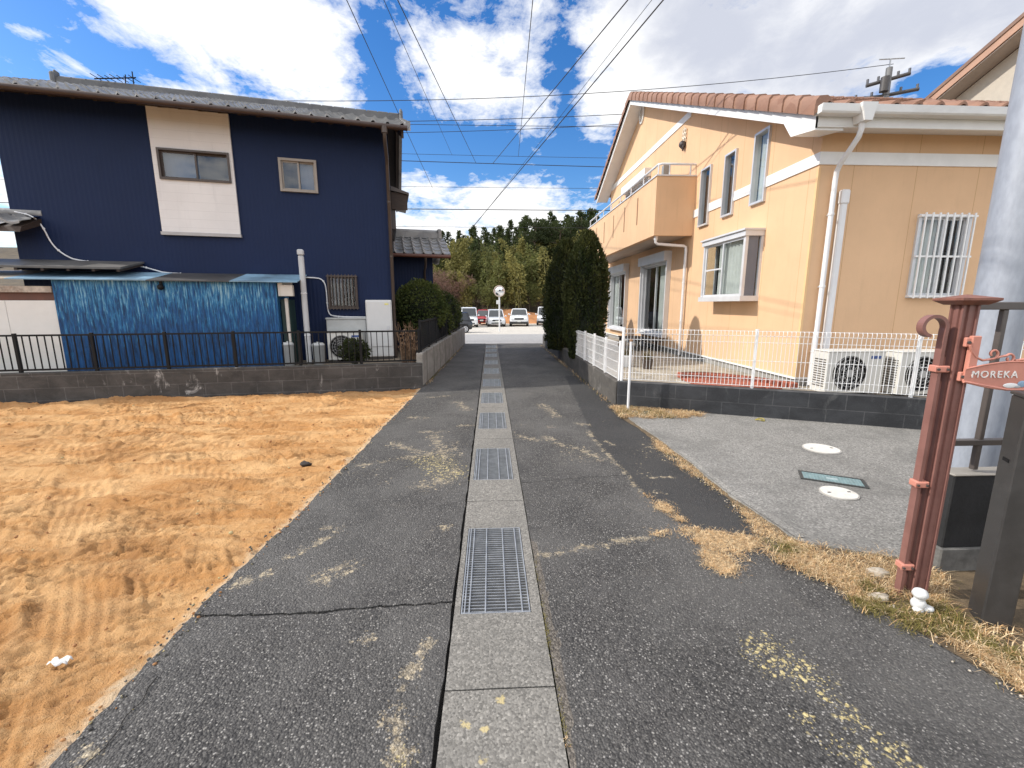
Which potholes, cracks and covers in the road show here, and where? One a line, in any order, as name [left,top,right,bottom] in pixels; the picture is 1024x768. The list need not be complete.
crack [251,345,486,768]
manhole cover [802,443,842,455]
drain grate [461,527,531,614]
manhole cover [798,470,870,489]
drain grate [479,412,507,429]
drain grate [481,393,503,403]
drain grate [474,448,513,480]
manhole cover [819,486,860,501]
